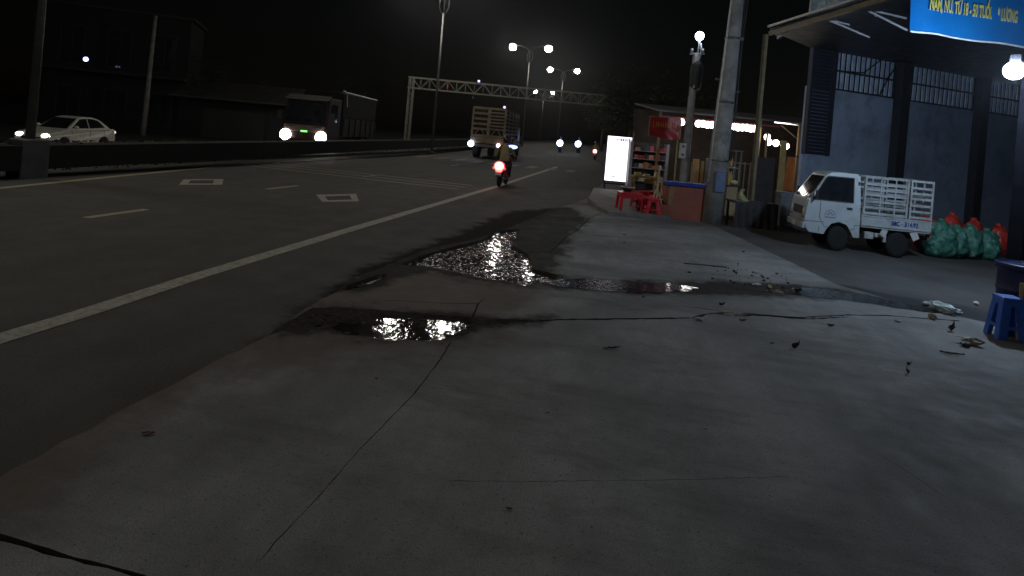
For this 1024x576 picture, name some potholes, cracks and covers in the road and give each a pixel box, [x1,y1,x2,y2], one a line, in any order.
crack [537,306,958,321]
crack [0,534,147,576]
pothole [401,229,558,286]
pothole [268,308,538,341]
